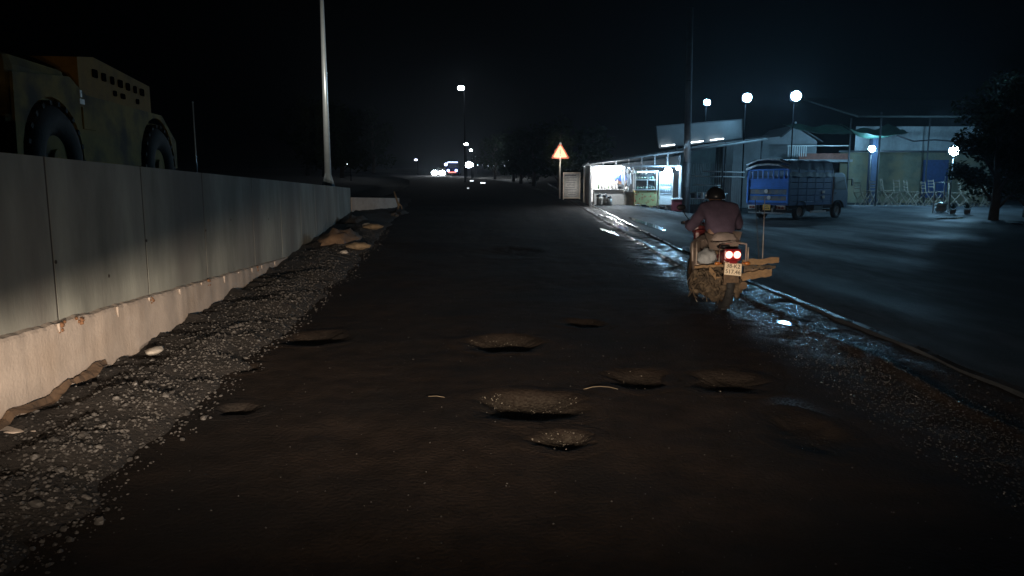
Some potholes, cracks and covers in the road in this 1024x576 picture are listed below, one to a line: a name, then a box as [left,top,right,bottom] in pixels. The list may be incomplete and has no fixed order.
pothole [505,423,614,460]
pothole [744,404,882,466]
pothole [546,316,621,330]
pothole [661,366,788,398]
pothole [263,328,364,348]
pothole [586,365,699,395]
pothole [446,331,559,356]
pothole [454,386,609,428]
pothole [199,398,276,421]
